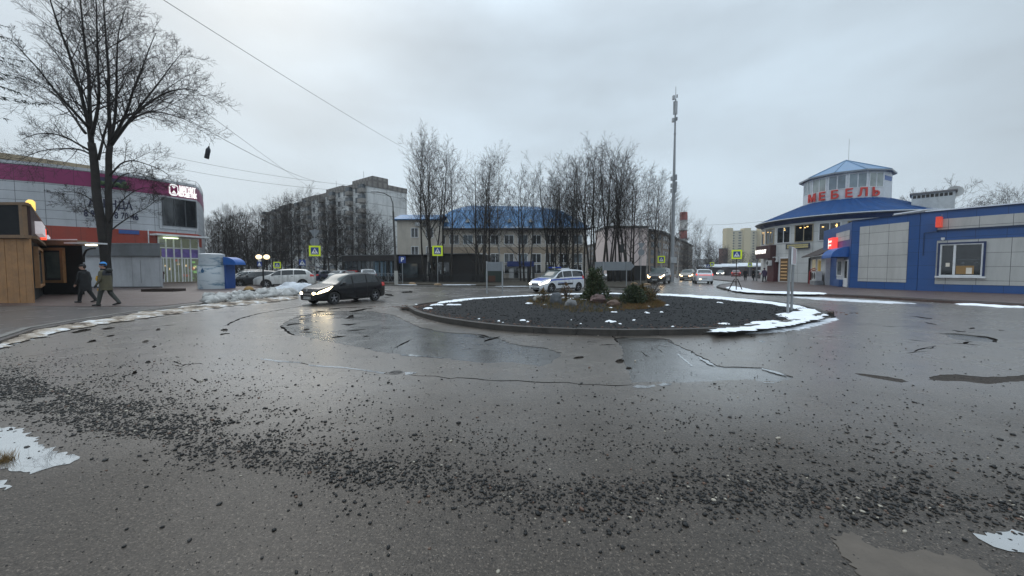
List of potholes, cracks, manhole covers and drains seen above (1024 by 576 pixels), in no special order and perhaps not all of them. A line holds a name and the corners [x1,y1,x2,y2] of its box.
crack [226,291,418,349]
crack [905,316,1004,353]
